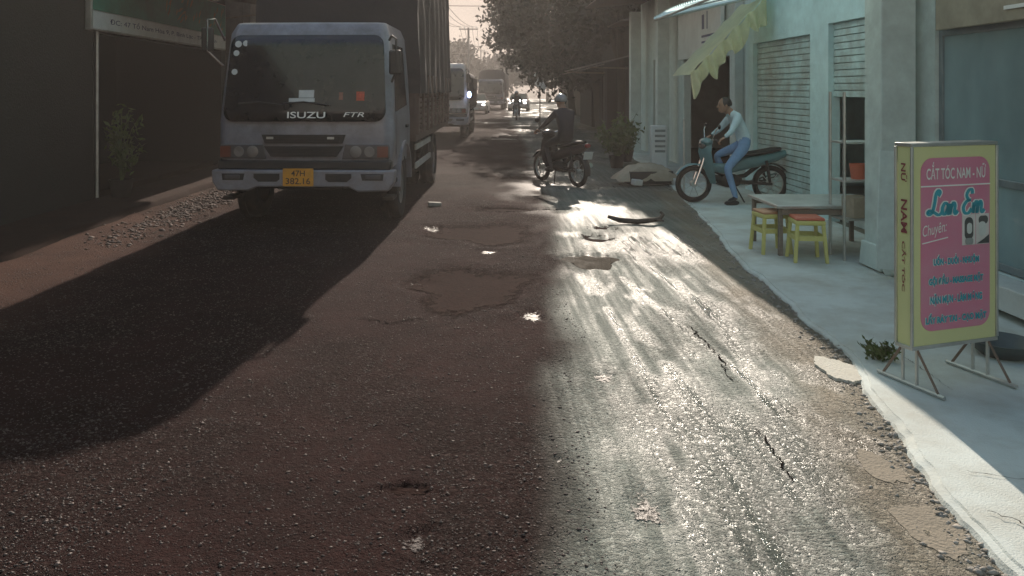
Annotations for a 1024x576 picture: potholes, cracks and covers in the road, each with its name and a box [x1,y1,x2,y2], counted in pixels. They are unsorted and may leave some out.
pothole [375,482,430,495]
pothole [561,255,619,270]
crack [755,428,794,482]
crack [687,326,733,380]
pothole [401,266,545,319]
